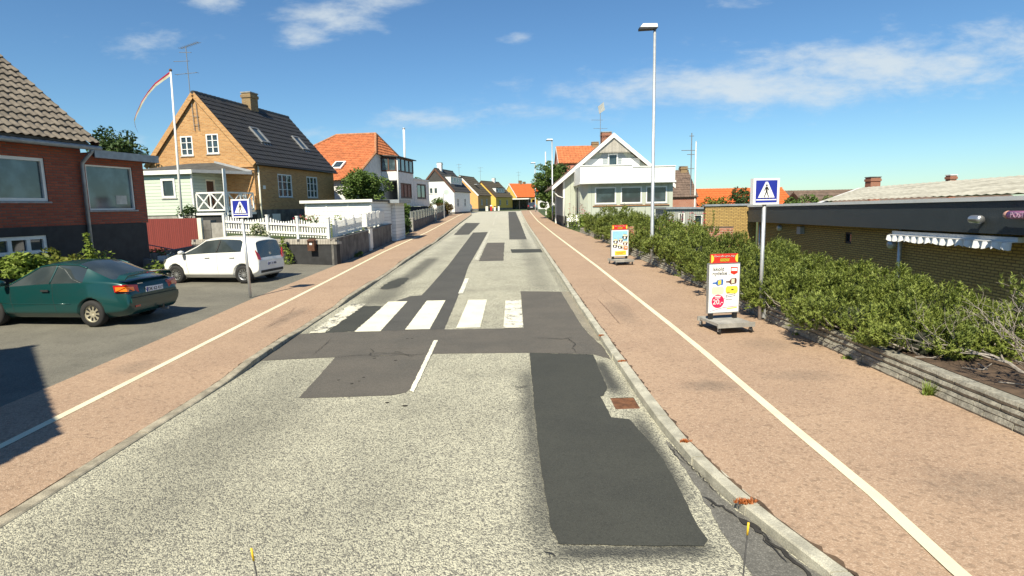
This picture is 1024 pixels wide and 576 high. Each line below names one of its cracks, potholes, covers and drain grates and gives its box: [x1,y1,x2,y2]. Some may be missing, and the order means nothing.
crack [670,443,812,576]
